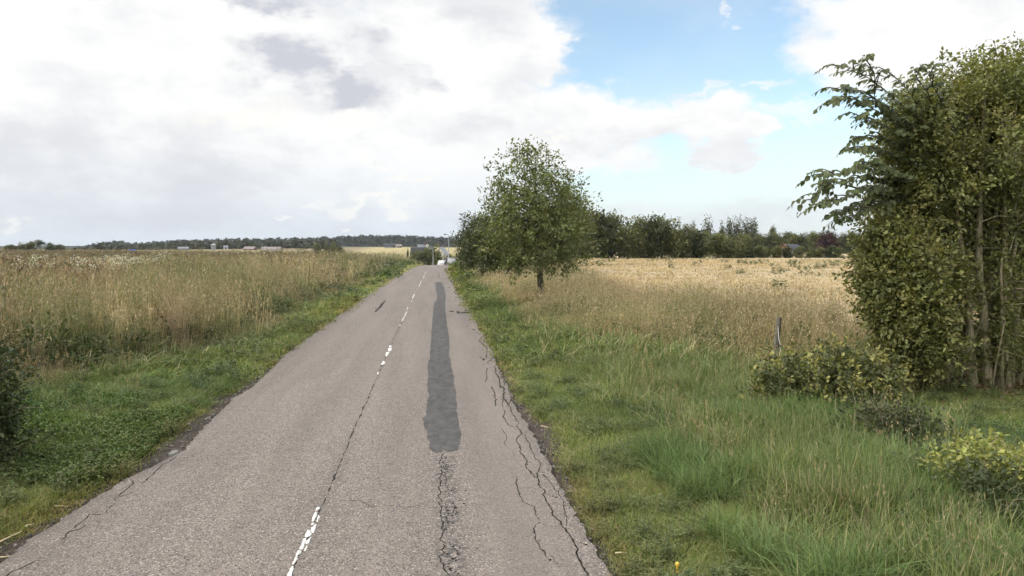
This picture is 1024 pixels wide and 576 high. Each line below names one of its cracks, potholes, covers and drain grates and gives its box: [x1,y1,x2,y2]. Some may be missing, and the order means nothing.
crack [329,453,467,576]
crack [469,329,598,576]
crack [6,456,177,576]
